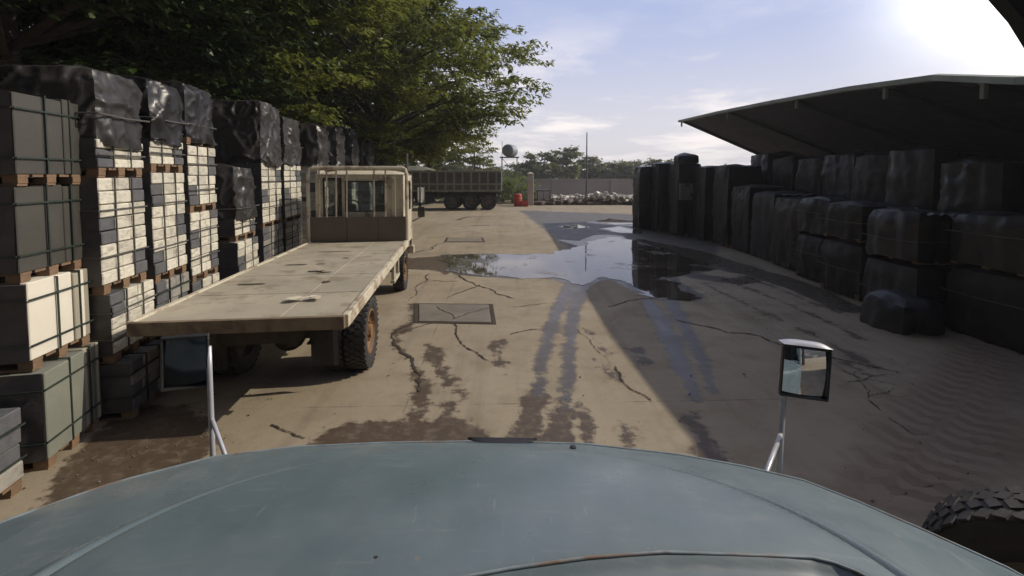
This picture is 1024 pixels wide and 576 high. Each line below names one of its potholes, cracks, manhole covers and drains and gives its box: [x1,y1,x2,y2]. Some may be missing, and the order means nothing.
crack [676,319,921,444]
manhole cover [414,303,496,324]
crack [579,331,652,401]
crack [271,424,305,438]
crack [391,273,555,391]
